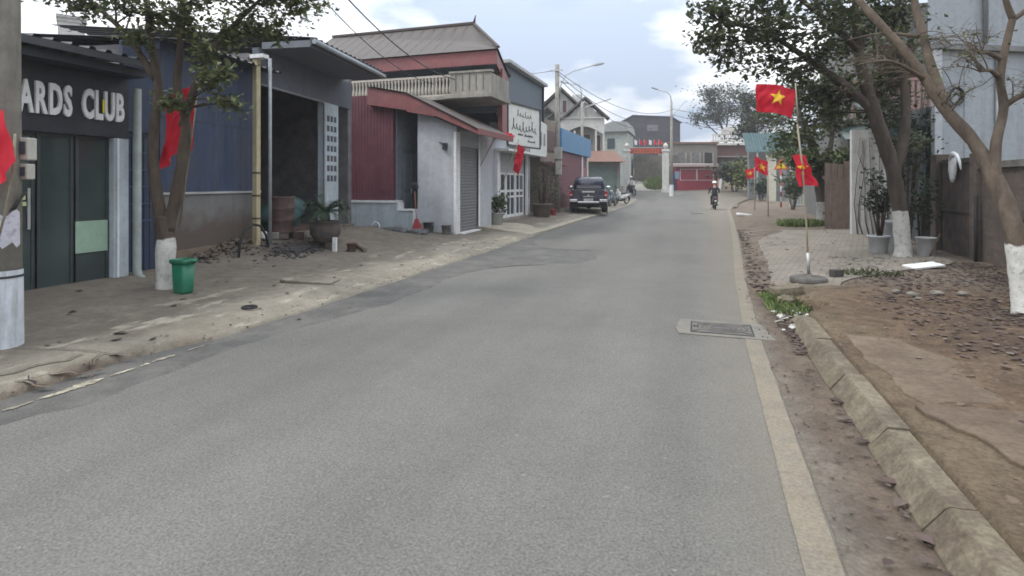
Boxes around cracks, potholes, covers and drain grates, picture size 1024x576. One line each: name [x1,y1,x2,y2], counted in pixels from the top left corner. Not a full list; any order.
manhole cover [675,319,776,341]
